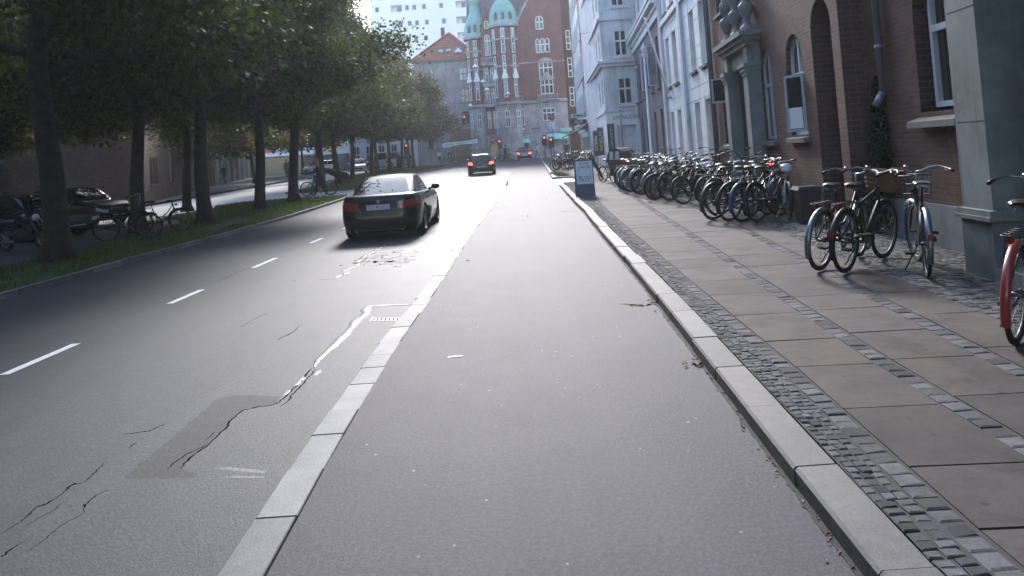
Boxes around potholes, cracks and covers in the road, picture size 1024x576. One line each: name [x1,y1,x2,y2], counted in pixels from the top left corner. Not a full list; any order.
crack [321,245,424,280]
crack [1,461,107,557]
crack [167,368,315,469]
